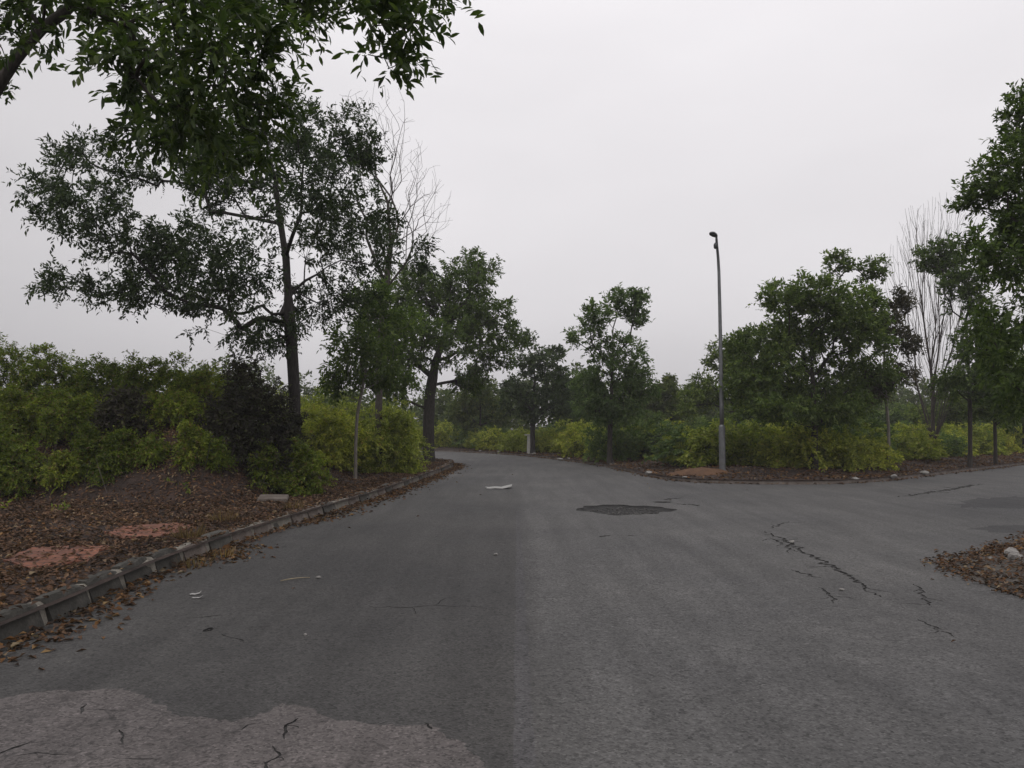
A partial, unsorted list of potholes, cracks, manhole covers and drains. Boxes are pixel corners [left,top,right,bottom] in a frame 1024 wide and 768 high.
crack [762,522,888,603]
crack [897,484,982,497]
crack [370,598,478,614]
crack [0,741,67,757]
crack [241,718,299,768]
pothole [576,505,677,515]
crack [119,730,152,759]
crack [908,584,954,637]
